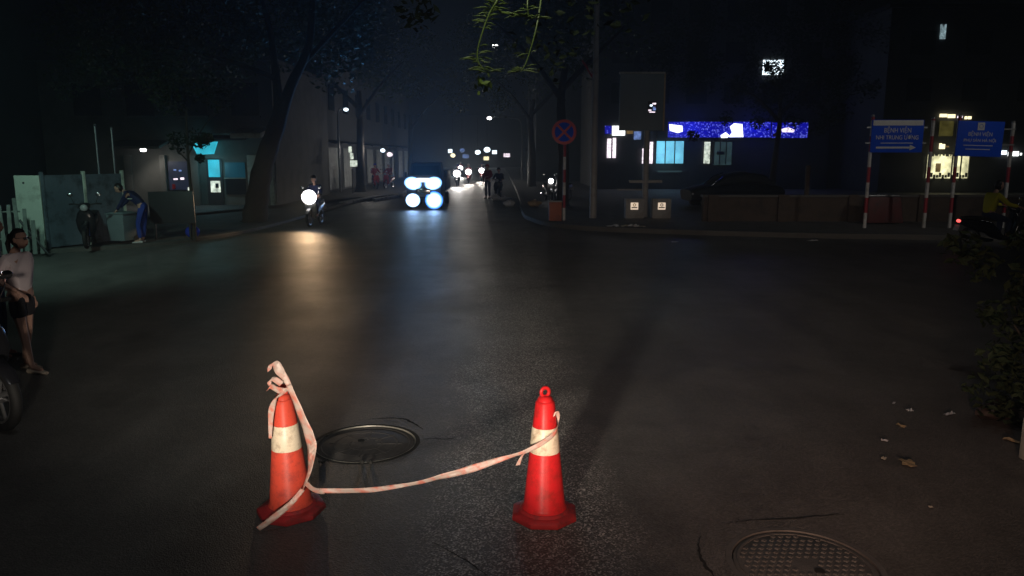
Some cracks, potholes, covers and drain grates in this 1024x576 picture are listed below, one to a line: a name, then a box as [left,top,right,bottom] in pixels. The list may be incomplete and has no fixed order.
crack [697,514,835,576]
manhole cover [725,528,888,576]
crack [432,542,488,576]
crack [375,418,452,439]
manhole cover [315,424,420,464]
